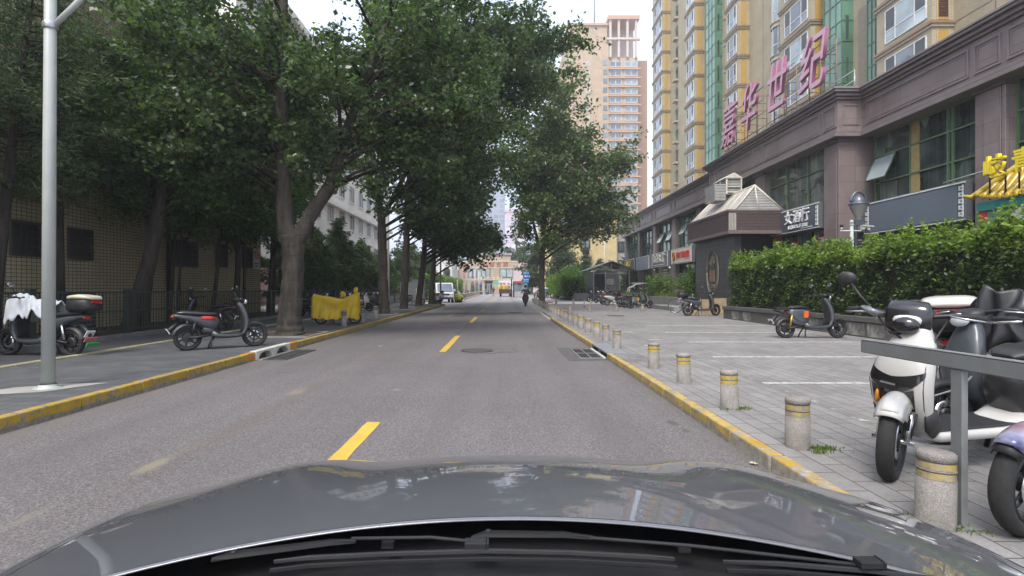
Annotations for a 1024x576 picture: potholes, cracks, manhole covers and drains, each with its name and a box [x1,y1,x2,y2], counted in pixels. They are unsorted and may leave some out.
drain grate [557,343,625,360]
drain grate [250,343,316,360]
